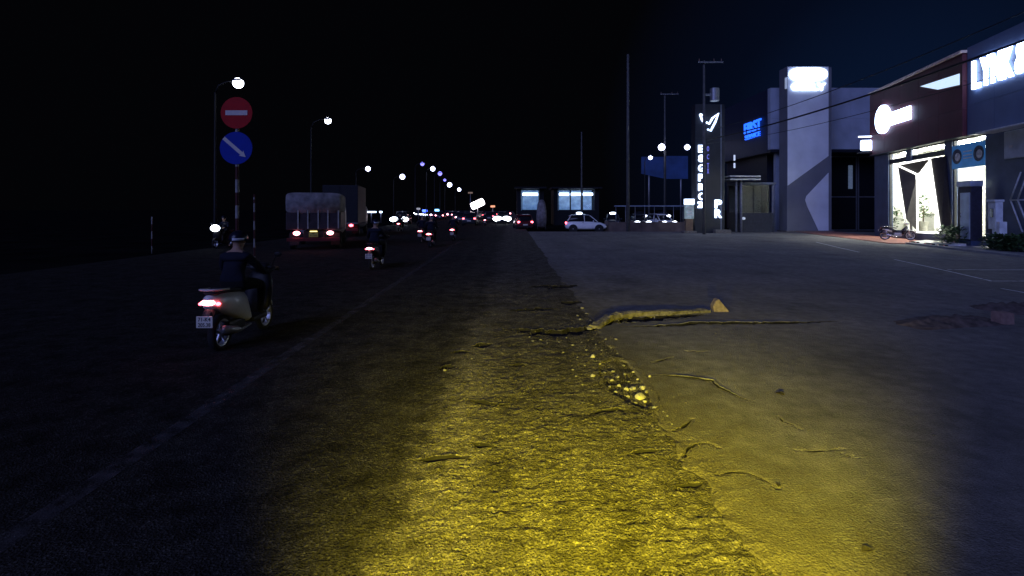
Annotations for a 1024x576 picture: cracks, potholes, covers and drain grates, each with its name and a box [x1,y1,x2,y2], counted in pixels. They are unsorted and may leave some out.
pothole [589,356,663,414]
crack [416,441,495,465]
crack [674,419,779,492]
crack [777,416,802,430]
crack [796,448,856,458]
crack [589,351,754,415]
